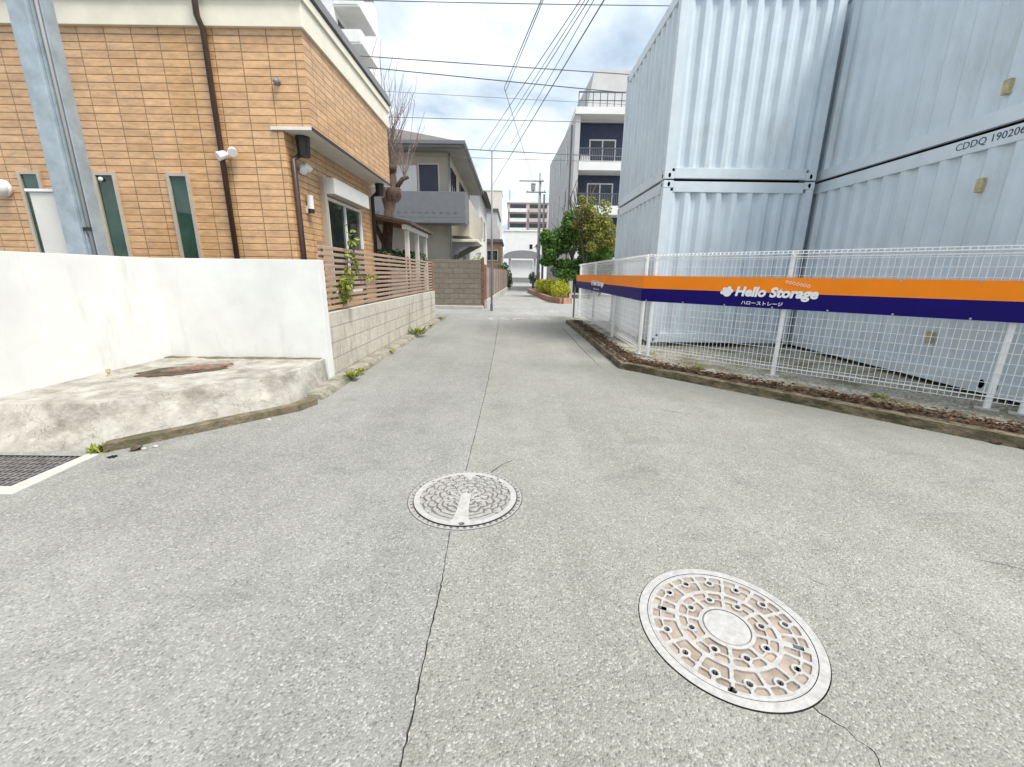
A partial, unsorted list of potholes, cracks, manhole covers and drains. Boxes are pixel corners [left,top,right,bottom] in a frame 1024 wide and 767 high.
manhole cover [408,471,522,532]
manhole cover [638,569,831,715]
drain grate [0,454,100,495]
crack [399,317,500,767]
crack [812,706,881,767]
